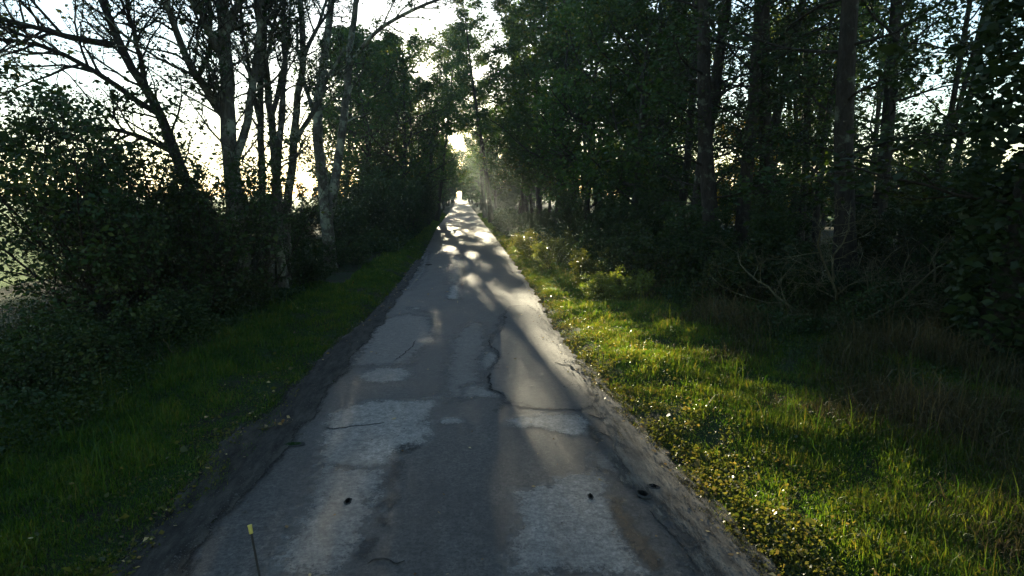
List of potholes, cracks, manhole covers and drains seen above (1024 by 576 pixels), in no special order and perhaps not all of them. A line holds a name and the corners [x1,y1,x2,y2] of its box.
crack [486,313,537,414]
pothole [635,489,652,499]
crack [352,441,420,564]
crack [394,254,466,361]
